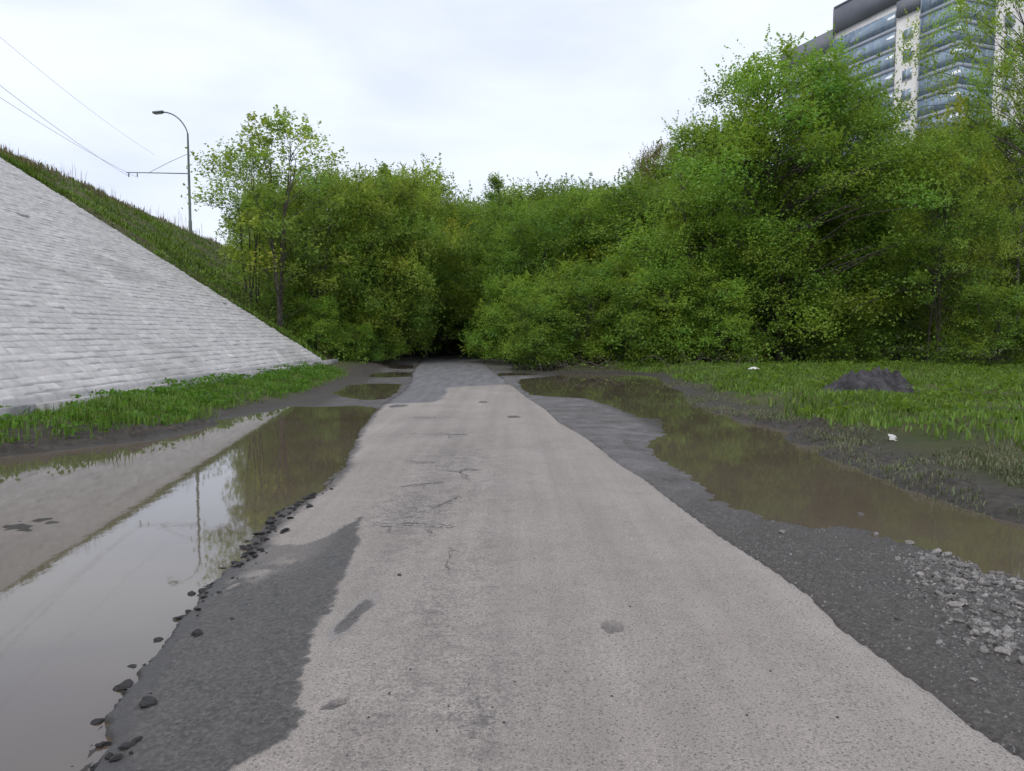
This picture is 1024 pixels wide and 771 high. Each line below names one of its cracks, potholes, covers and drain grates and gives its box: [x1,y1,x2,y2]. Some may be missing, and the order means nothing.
crack [372,460,481,573]
pothole [601,619,624,634]
